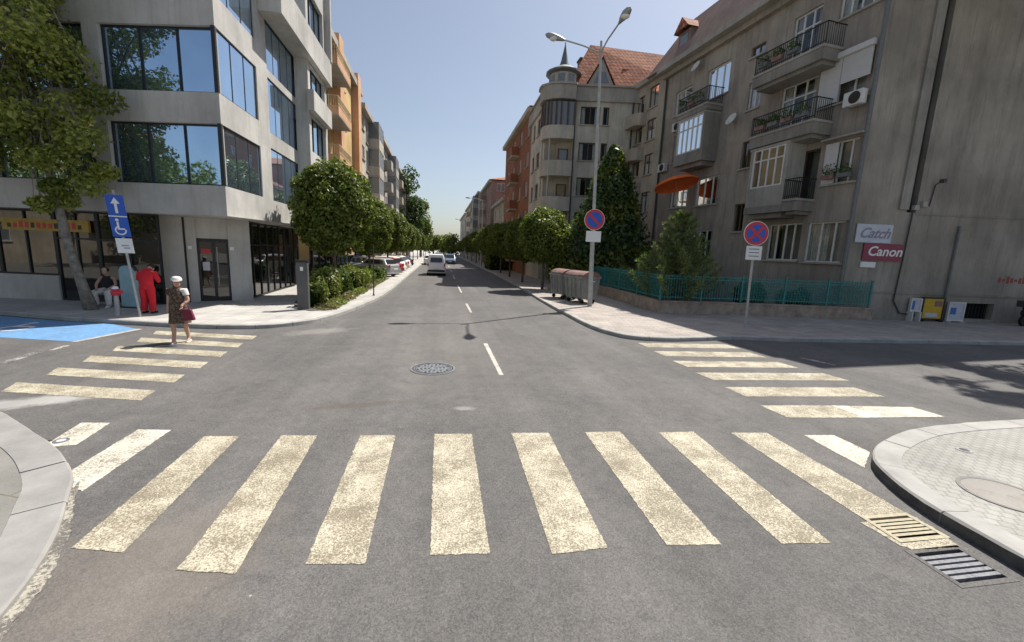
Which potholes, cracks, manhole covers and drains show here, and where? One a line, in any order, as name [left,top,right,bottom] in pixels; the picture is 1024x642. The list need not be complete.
manhole cover [410,362,455,375]
drain grate [859,512,951,543]
manhole cover [955,476,1024,513]
drain grate [904,545,1020,589]
